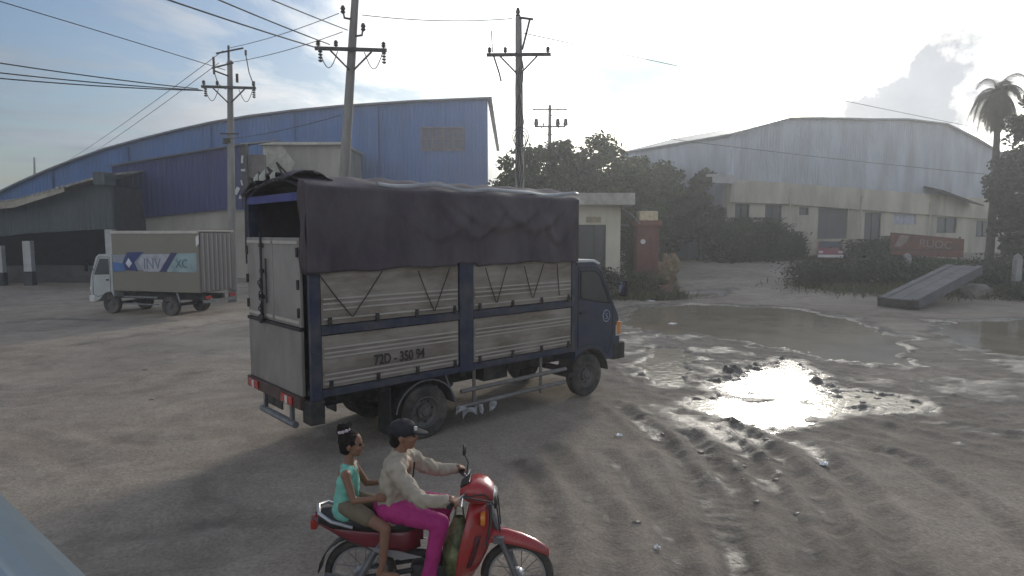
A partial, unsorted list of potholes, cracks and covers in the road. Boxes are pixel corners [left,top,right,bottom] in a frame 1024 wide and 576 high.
pothole [677,356,941,434]
